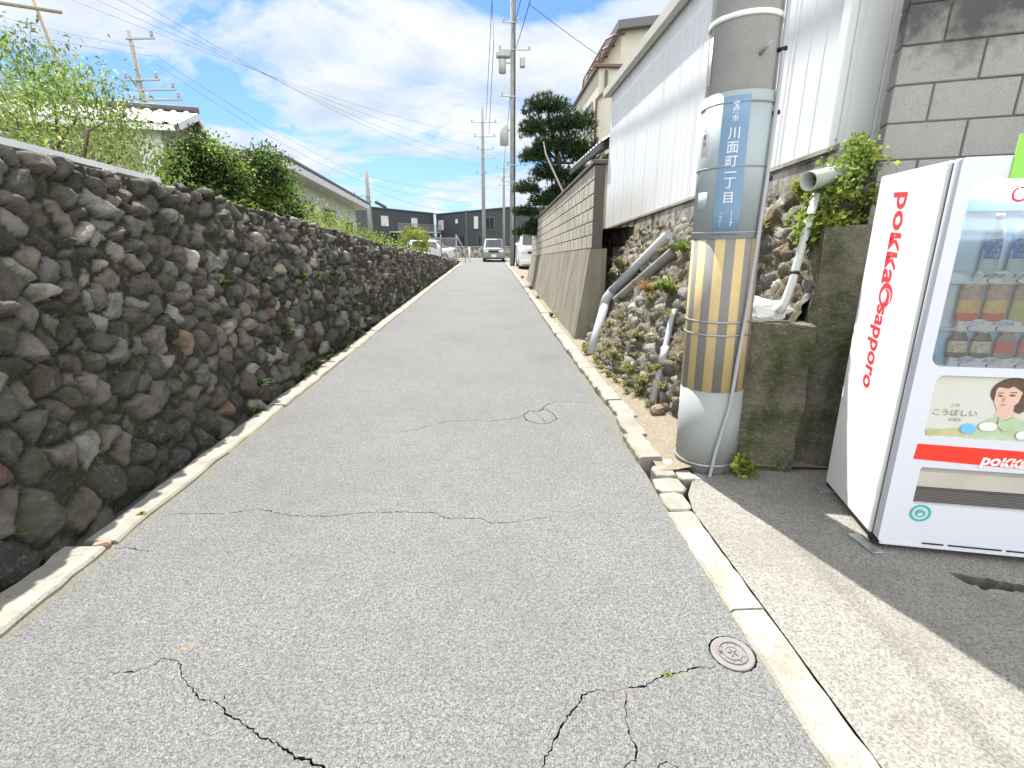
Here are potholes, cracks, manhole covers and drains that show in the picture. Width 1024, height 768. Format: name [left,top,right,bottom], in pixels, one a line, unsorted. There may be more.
crack [541,665,715,768]
crack [86,657,326,768]
crack [387,401,588,434]
manhole cover [708,636,758,673]
crack [156,509,559,523]
